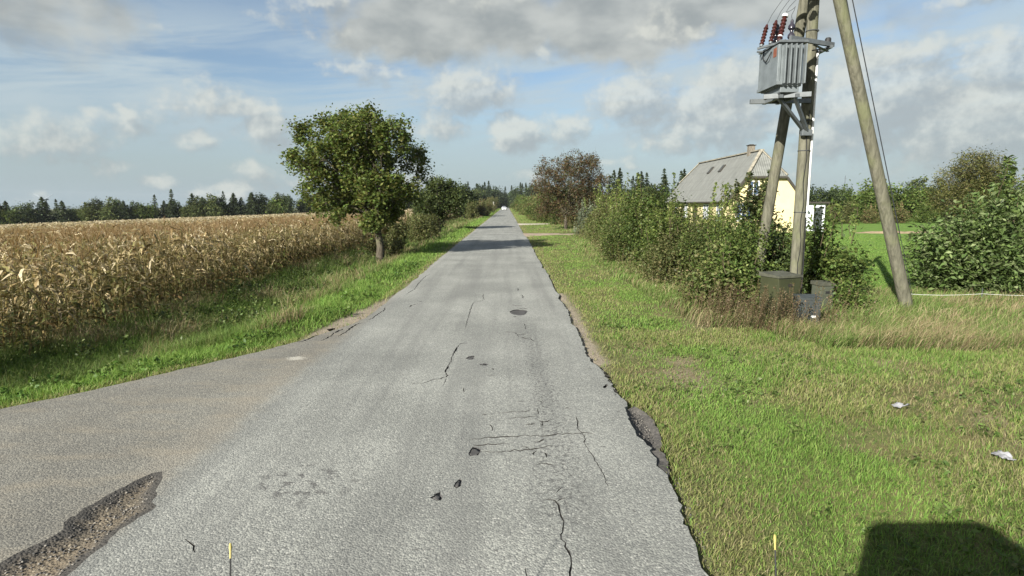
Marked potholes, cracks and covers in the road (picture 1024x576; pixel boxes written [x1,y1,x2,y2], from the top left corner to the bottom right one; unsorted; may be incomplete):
crack [547,487,572,576]
pothole [0,471,163,576]
pothole [650,451,670,477]
pothole [626,406,663,451]
crack [425,294,485,393]
crack [300,308,385,342]
crack [475,400,608,485]
